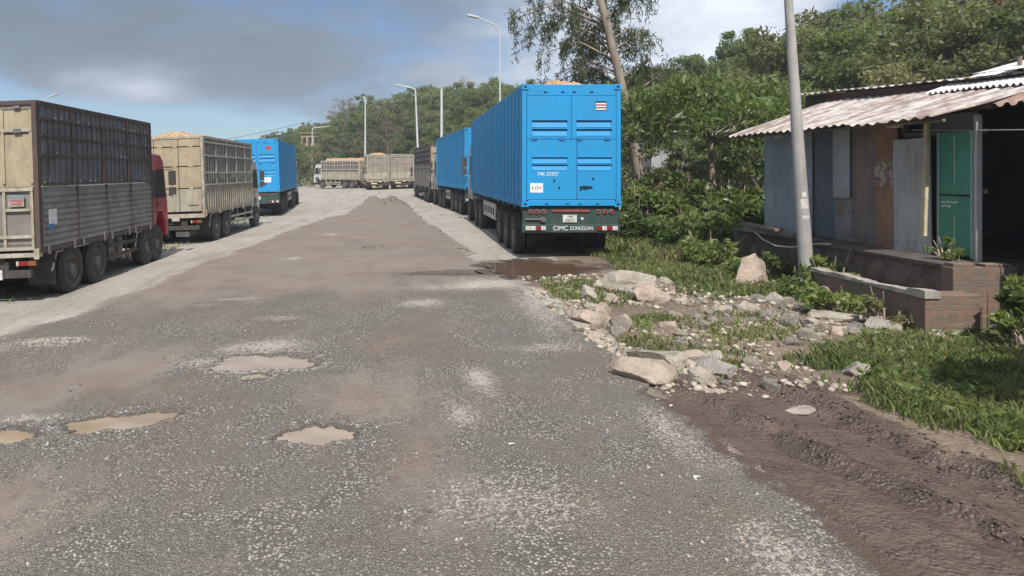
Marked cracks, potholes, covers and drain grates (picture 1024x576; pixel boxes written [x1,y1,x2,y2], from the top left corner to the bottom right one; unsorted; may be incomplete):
pothole [53,406,200,438]
pothole [197,351,334,374]
pothole [264,422,366,449]
pothole [236,372,274,380]
pothole [469,258,616,283]
pothole [0,425,49,446]
